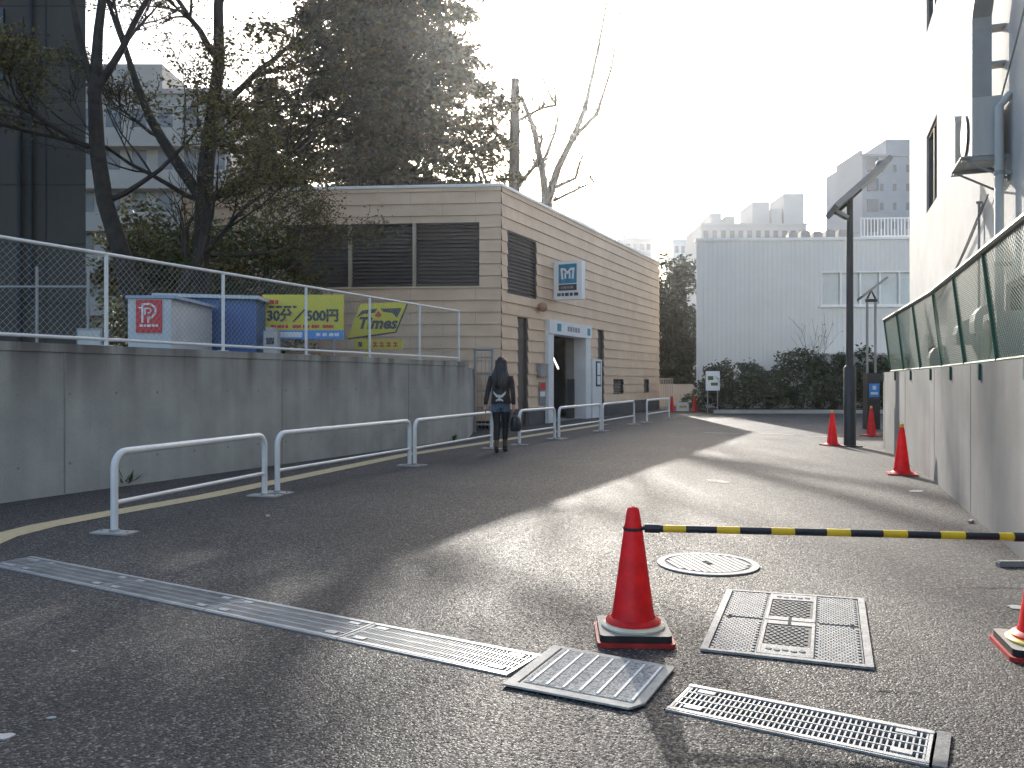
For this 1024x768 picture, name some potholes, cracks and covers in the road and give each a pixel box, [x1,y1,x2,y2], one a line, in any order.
drain grate [337,623,541,678]
drain grate [96,577,246,611]
manhole cover [700,589,874,670]
manhole cover [657,553,760,576]
drain grate [0,556,50,570]
drain grate [8,560,138,589]
drain grate [665,684,935,767]
drain grate [203,598,376,640]
